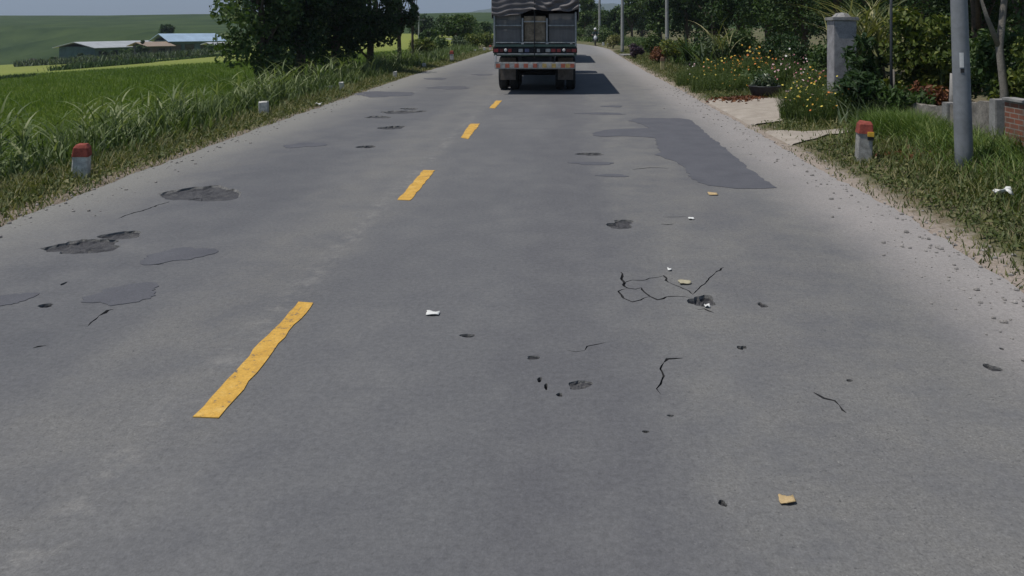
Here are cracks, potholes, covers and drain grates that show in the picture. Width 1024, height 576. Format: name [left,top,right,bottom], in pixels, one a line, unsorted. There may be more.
pothole [97,231,141,242]
pothole [158,185,242,202]
pothole [40,239,120,254]
crack [656,358,680,393]
pothole [569,380,593,390]
crack [618,267,724,313]
crack [815,393,846,413]
pothole [606,220,634,229]
pothole [687,295,716,307]
